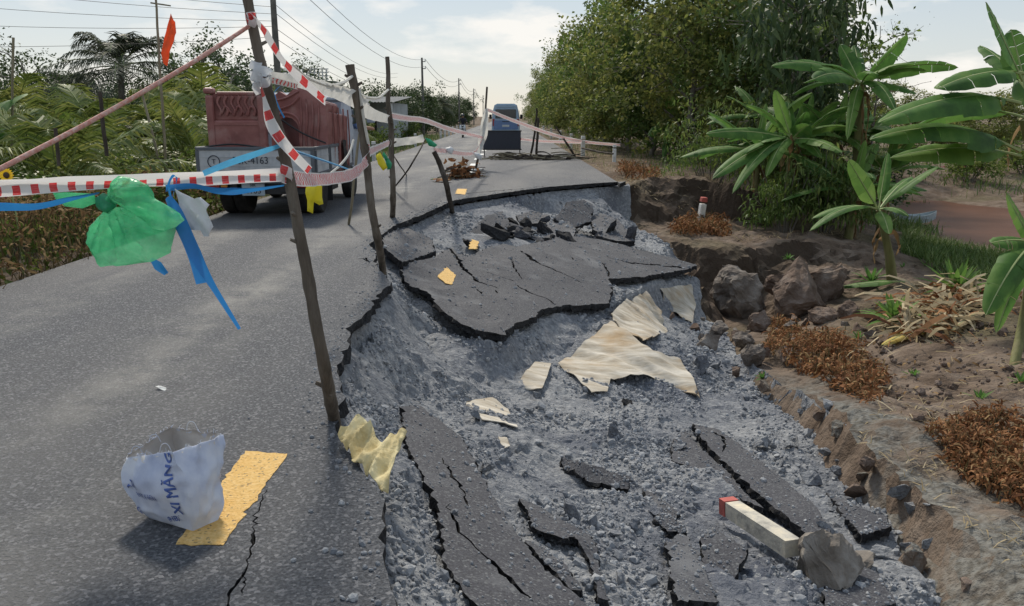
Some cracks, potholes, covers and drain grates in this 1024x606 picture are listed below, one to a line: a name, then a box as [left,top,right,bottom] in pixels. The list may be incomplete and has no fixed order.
crack [449,248,682,304]
crack [227,492,266,606]
crack [446,467,533,601]
